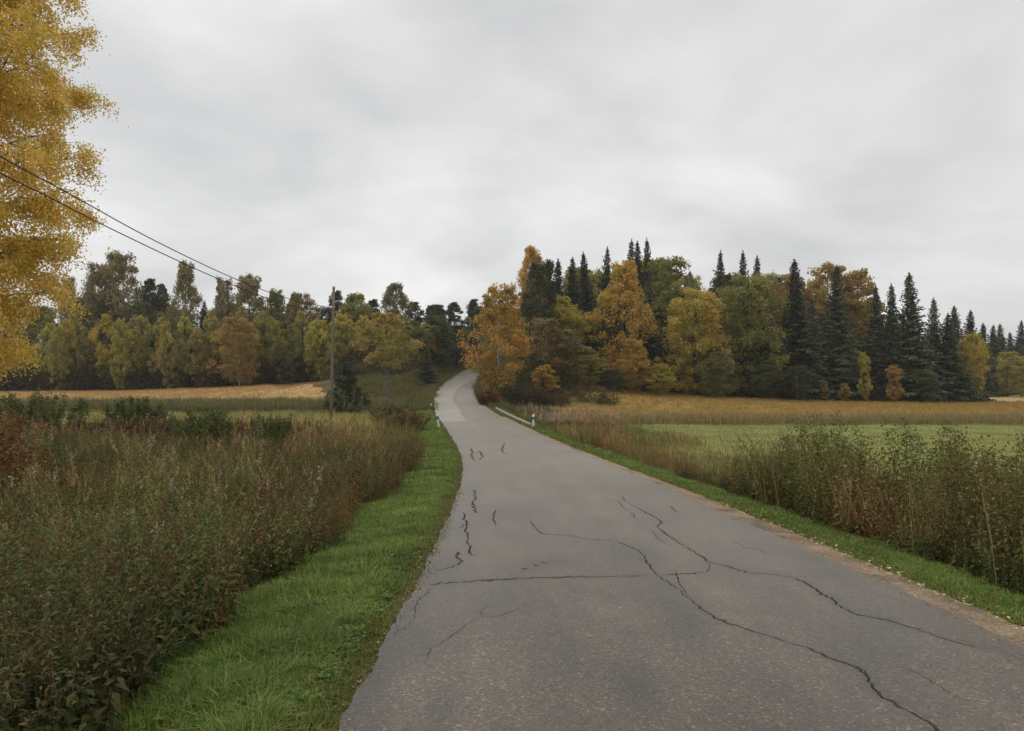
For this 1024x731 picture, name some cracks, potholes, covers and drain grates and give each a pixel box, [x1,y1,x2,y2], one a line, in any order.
crack [395,490,1016,731]
